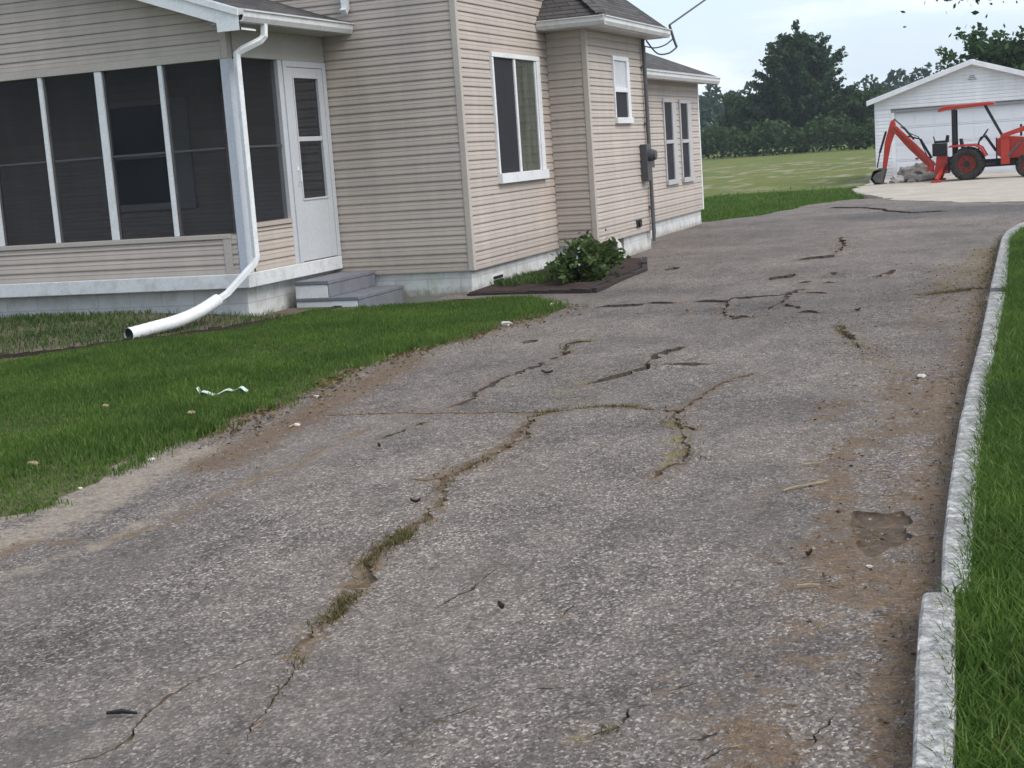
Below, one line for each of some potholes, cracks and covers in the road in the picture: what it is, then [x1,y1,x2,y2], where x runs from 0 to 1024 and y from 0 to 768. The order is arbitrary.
crack [601,237,859,347]
crack [55,341,753,767]
pothole [849,511,913,558]
crack [812,717,834,745]
